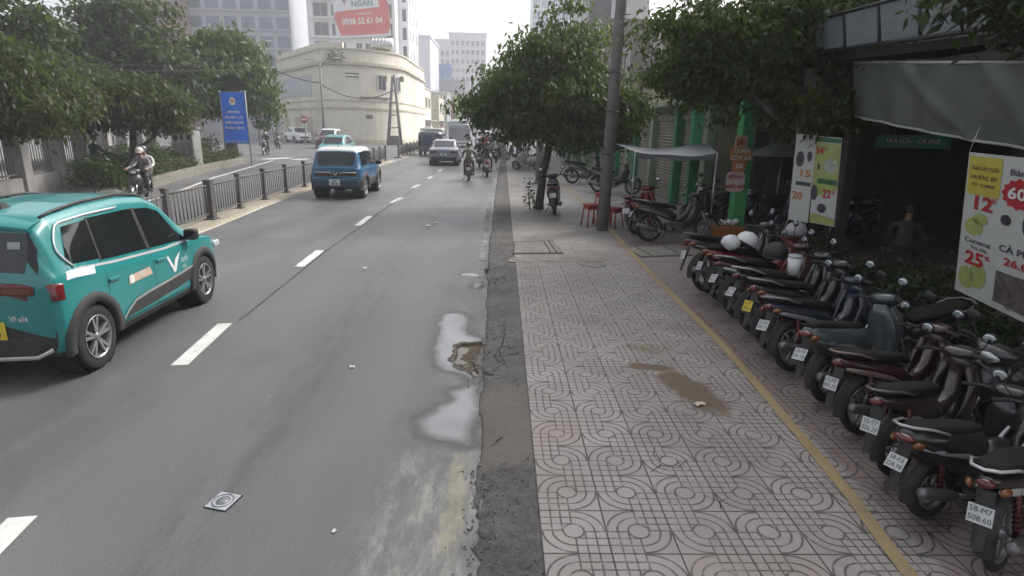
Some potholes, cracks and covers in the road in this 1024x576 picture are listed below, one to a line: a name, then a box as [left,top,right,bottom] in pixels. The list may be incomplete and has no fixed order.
pothole [447,341,484,378]
utility cover [513,240,564,255]
manhole cover [203,491,243,512]
crack [483,319,520,375]
utility cover [626,245,695,258]
